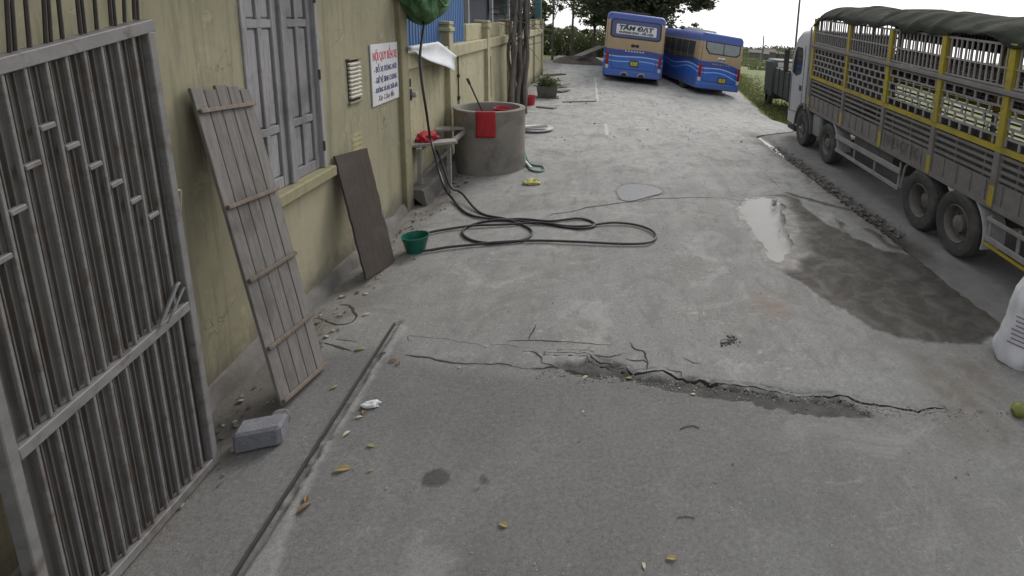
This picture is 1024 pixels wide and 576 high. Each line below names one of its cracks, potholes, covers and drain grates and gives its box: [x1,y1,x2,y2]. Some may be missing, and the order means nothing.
crack [407,325,946,416]
